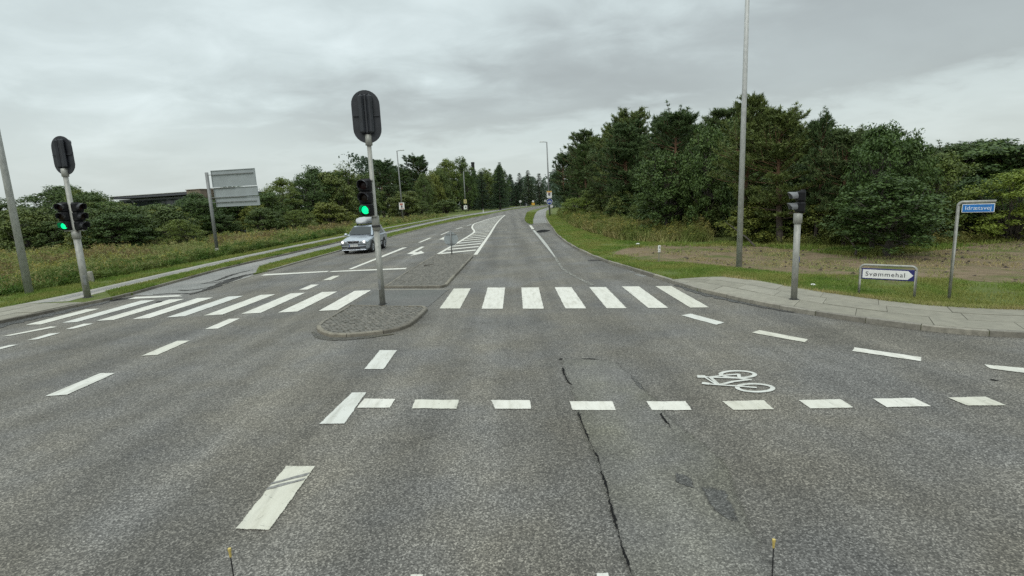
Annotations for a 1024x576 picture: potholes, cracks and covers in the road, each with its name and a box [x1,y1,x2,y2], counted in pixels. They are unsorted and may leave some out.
crack [577,412,631,572]
